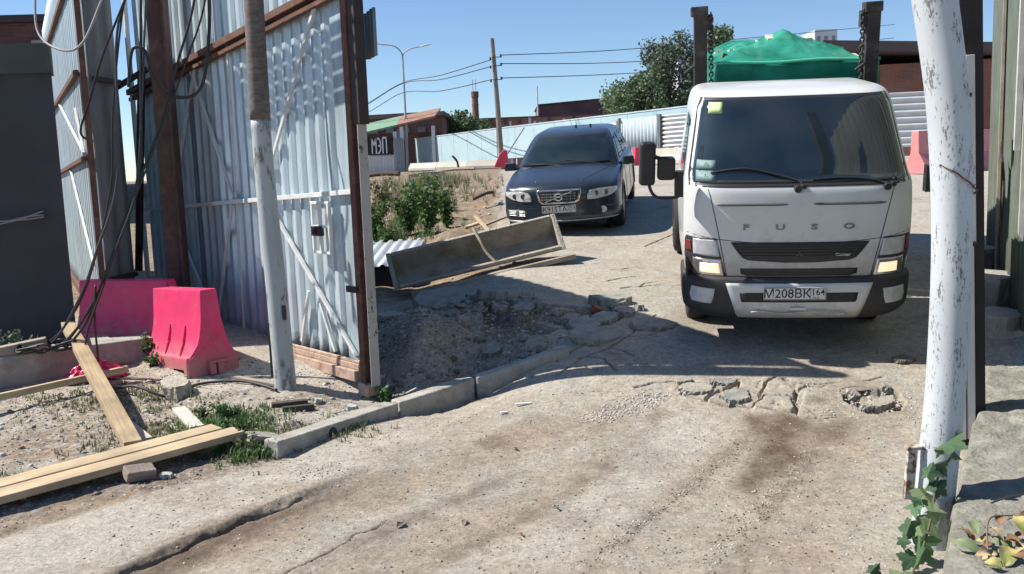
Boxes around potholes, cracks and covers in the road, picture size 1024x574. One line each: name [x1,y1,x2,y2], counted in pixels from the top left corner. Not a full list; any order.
pothole [462,298,641,353]
pothole [823,381,923,422]
crack [263,514,405,574]
crack [545,312,897,434]
